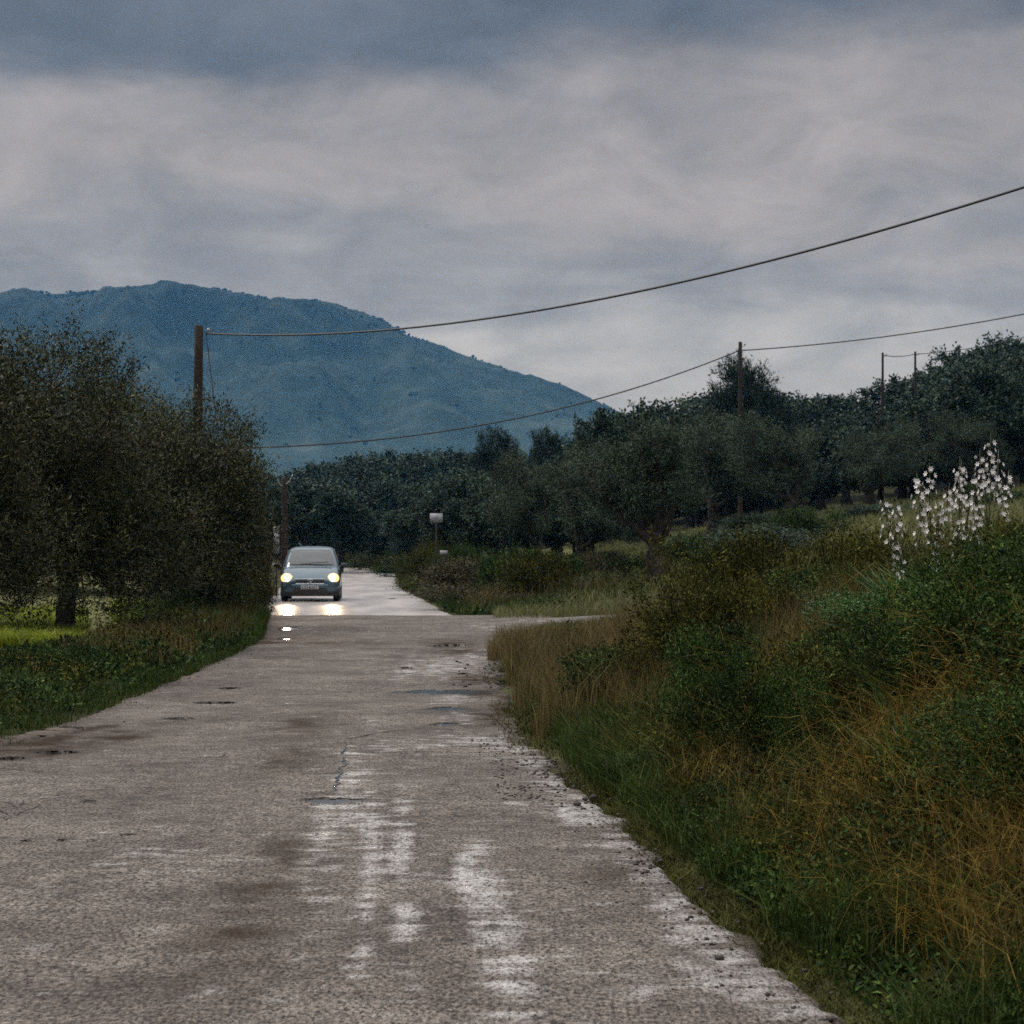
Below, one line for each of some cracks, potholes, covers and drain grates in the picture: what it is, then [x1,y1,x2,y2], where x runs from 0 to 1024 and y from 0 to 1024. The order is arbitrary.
pothole [295,796,377,805]
crack [327,730,396,794]
